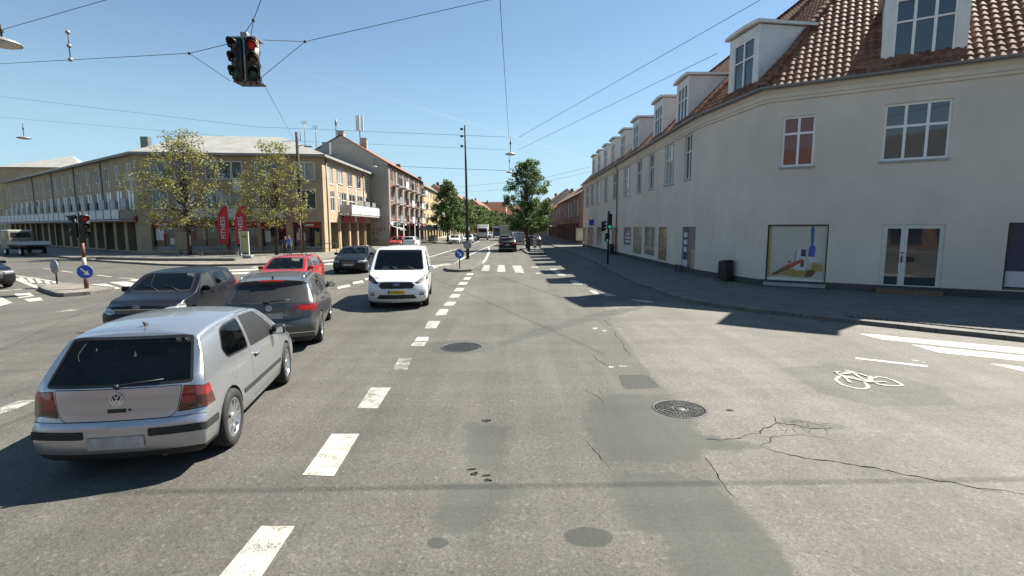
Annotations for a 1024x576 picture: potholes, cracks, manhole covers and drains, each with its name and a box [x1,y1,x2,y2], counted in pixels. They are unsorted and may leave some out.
crack [707,417,1021,494]
manhole cover [441,342,482,352]
manhole cover [652,400,708,419]
